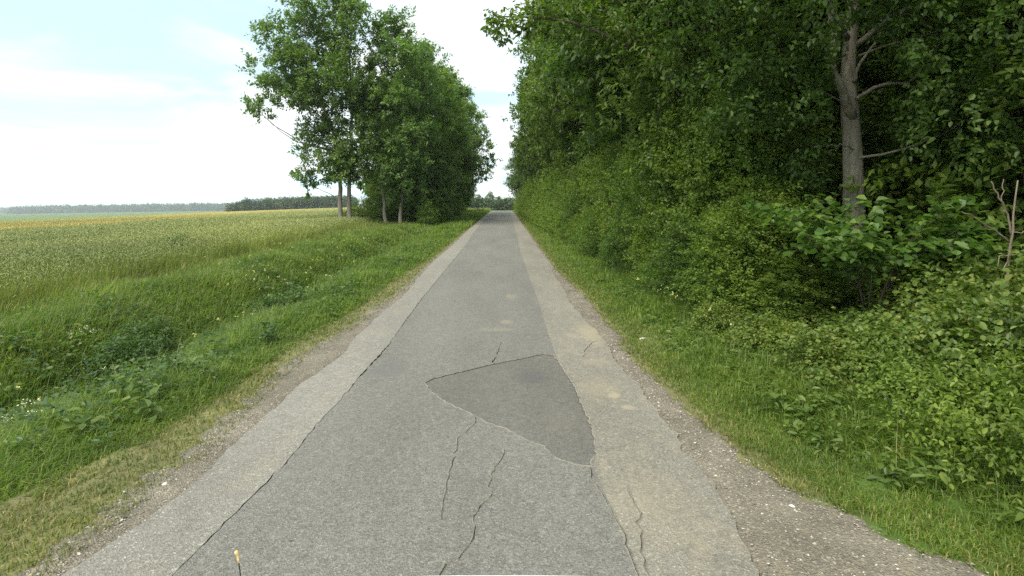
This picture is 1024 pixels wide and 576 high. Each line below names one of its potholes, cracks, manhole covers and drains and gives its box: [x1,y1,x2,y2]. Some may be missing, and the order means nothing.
crack [439,417,505,576]
crack [607,473,650,576]
